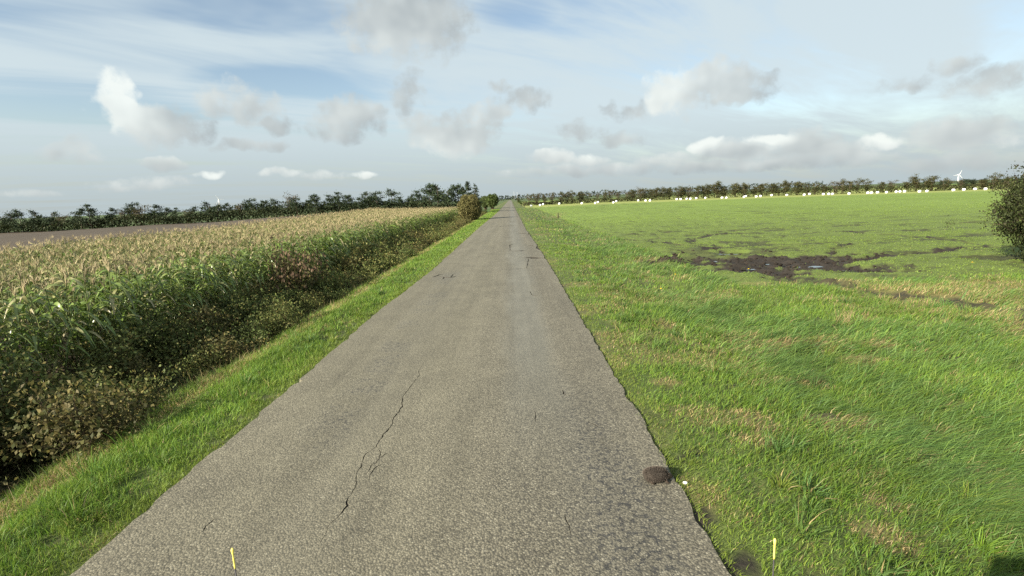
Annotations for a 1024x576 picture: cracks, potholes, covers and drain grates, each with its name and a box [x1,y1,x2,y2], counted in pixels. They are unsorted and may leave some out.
crack [321,369,420,541]
